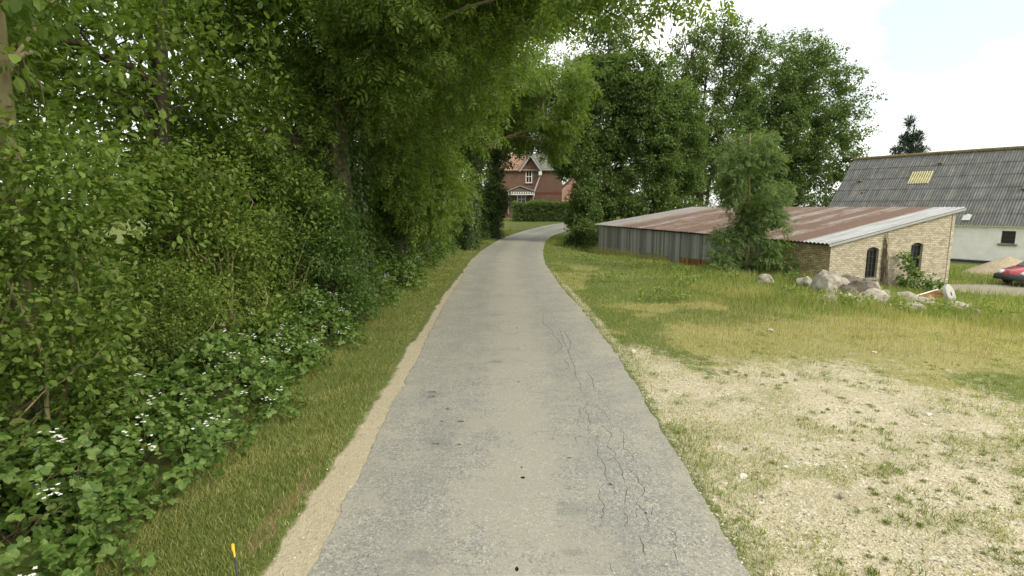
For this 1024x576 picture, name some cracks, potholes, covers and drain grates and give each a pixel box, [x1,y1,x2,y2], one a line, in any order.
crack [575,405,676,569]
